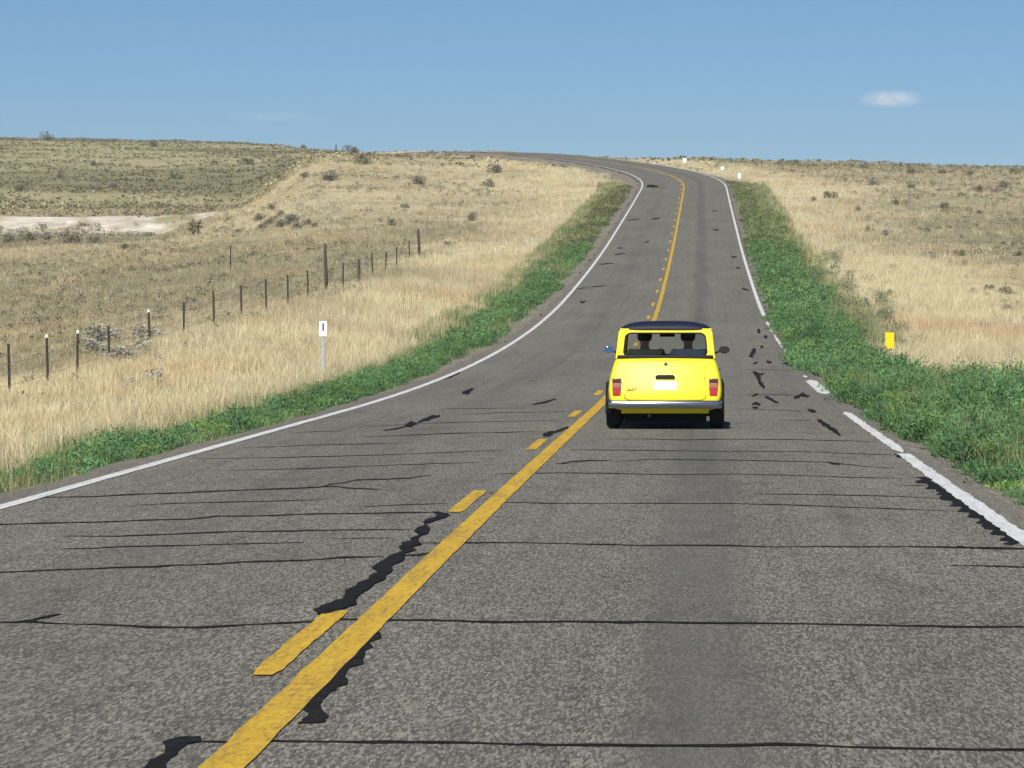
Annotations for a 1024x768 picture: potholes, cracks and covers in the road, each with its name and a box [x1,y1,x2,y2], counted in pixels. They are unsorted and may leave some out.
crack [0,408,1024,573]
